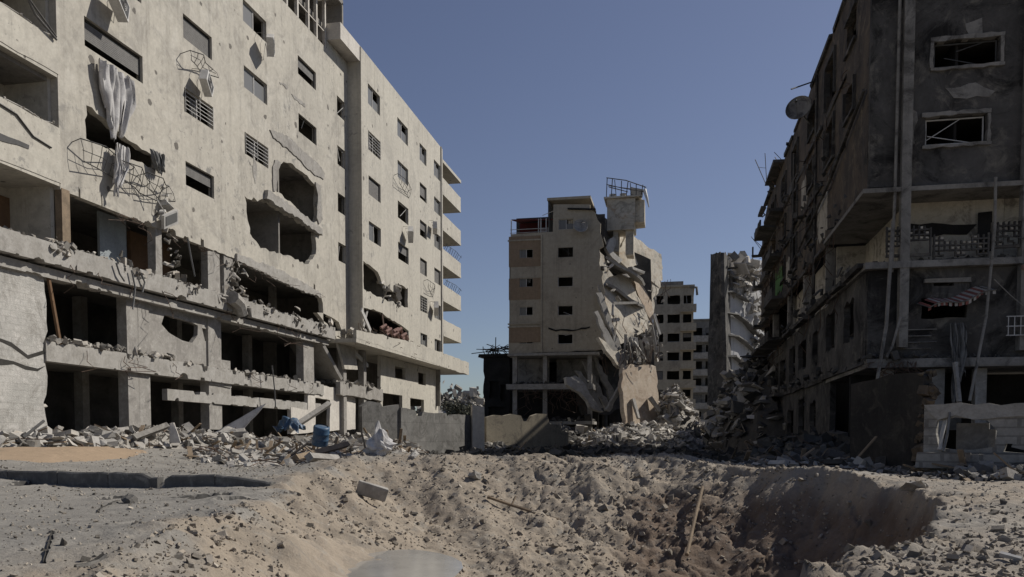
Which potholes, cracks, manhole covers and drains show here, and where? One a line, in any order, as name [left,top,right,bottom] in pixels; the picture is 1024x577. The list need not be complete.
pothole [103,453,938,577]
